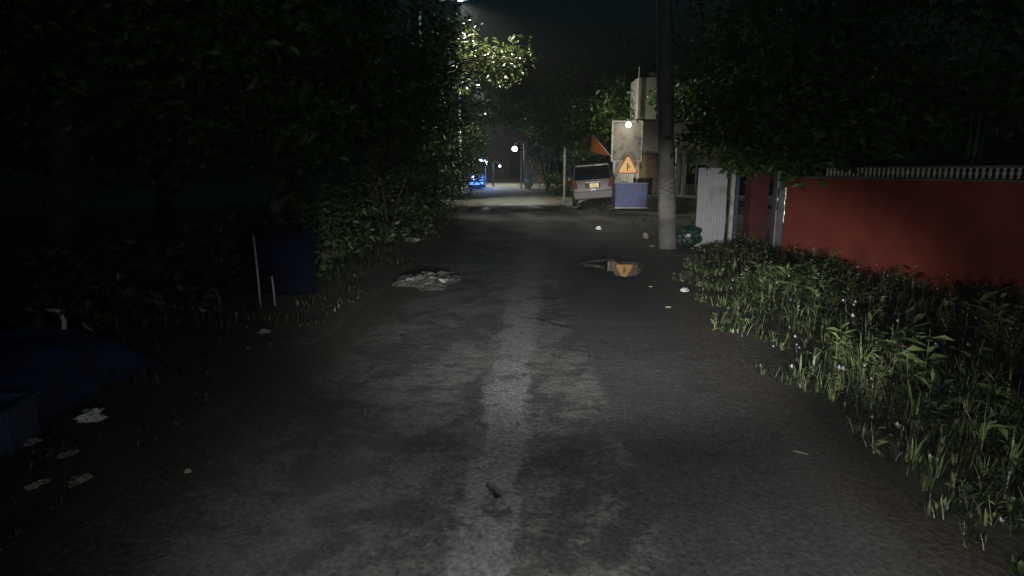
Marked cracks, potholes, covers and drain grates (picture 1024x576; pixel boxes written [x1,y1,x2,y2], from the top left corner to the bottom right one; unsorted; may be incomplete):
pothole [576,259,645,277]
crack [523,317,577,329]
